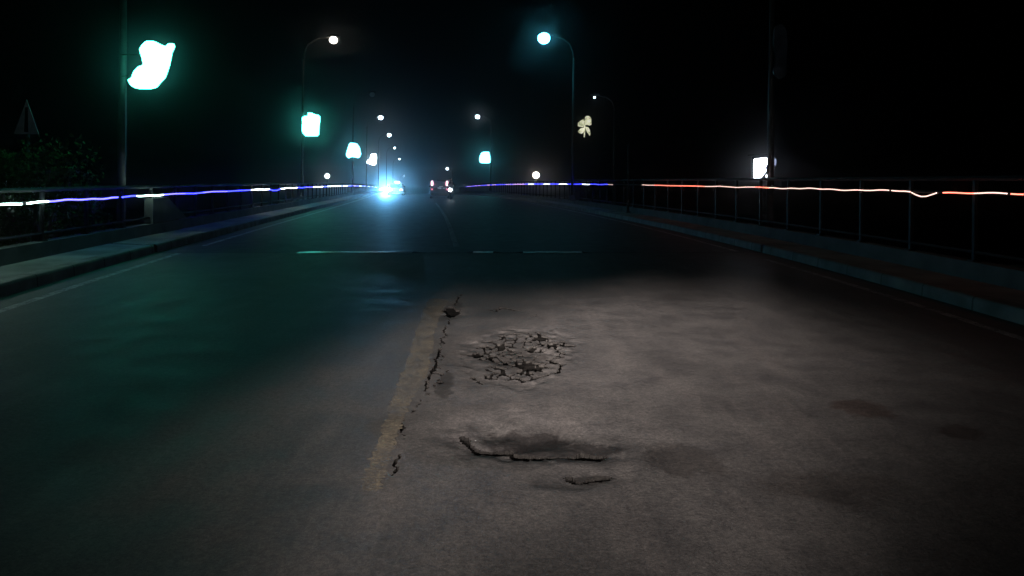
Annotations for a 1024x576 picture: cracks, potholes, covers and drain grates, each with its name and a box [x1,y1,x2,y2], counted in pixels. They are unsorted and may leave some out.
crack [393,298,459,474]
pothole [460,440,603,462]
